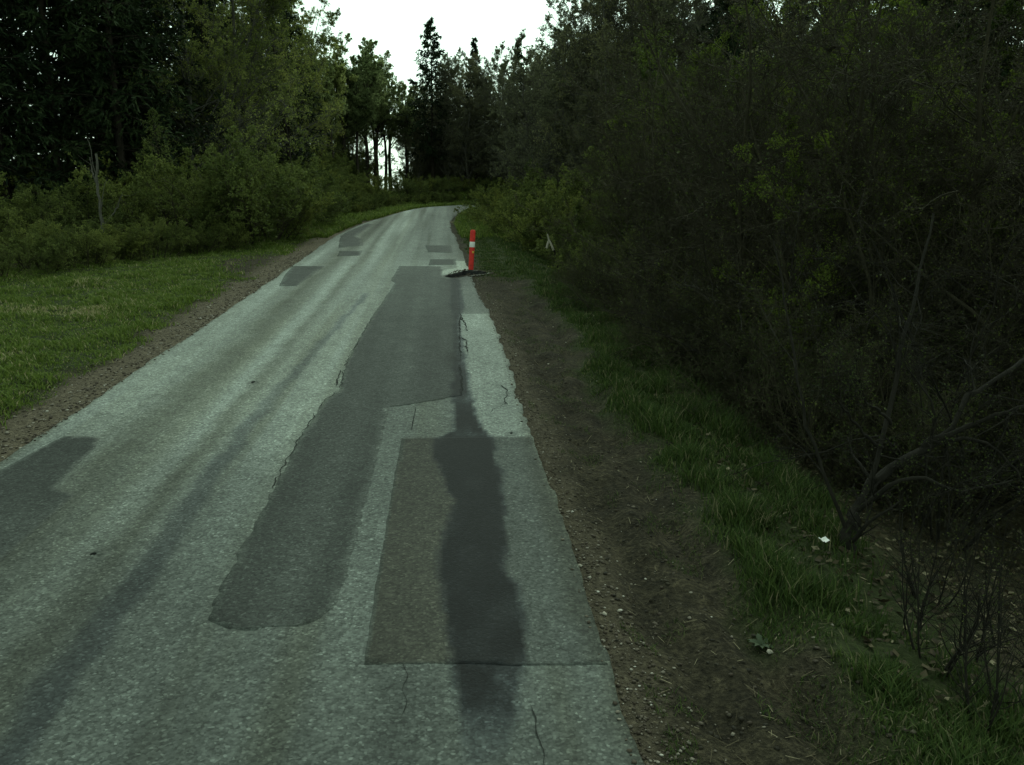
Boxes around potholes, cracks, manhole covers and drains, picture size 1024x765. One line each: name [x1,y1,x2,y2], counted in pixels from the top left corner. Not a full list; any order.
crack [531,707,545,764]
crack [395,314,468,429]
crack [272,320,371,489]
